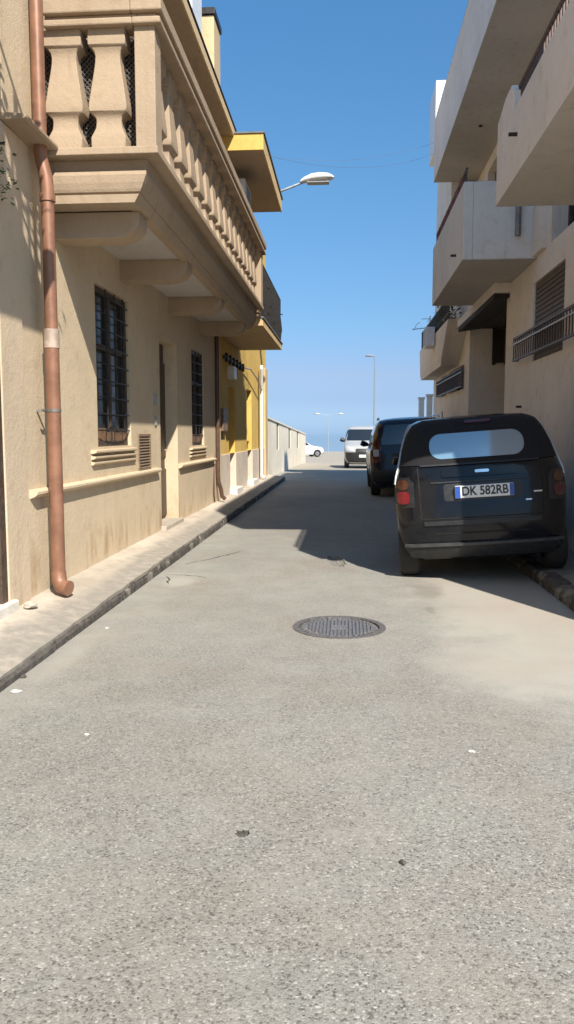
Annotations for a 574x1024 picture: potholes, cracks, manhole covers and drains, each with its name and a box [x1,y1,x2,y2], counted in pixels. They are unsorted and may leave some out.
manhole cover [293,616,386,639]
